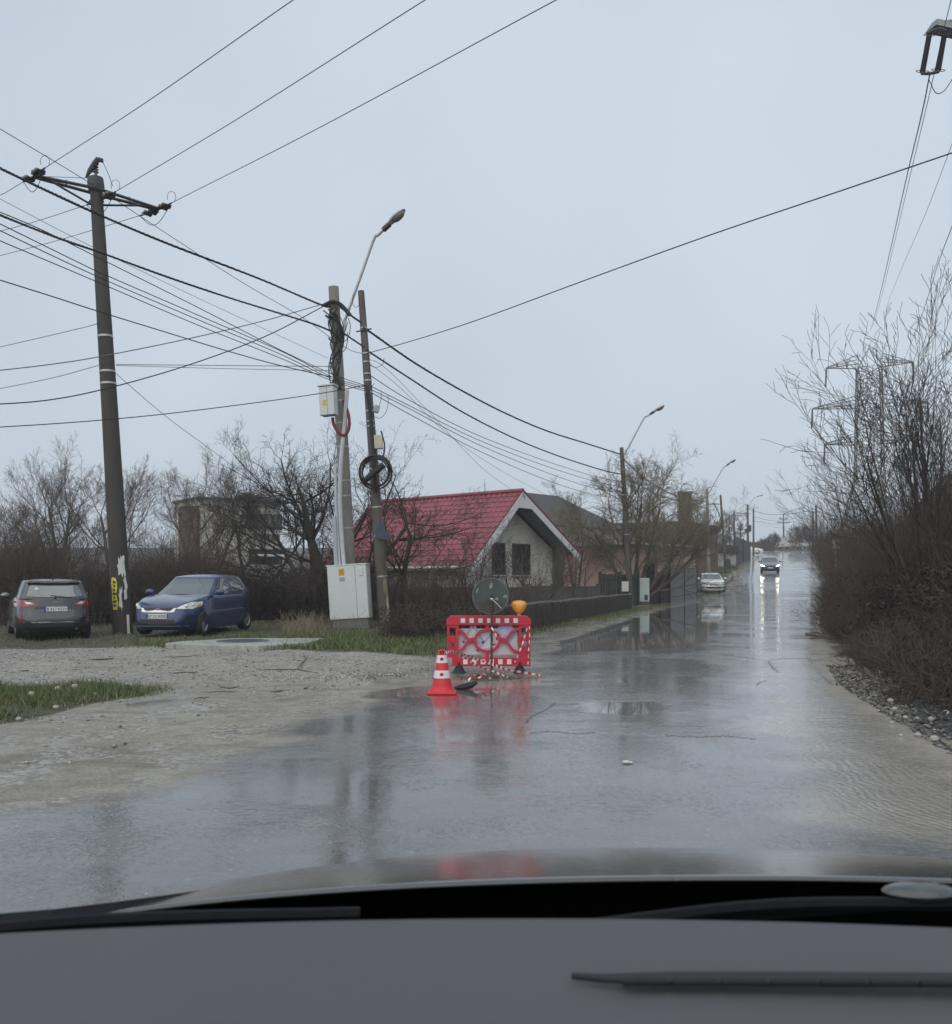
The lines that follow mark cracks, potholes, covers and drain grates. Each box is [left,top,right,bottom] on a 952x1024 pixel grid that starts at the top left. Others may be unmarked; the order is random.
crack [728,655,832,687]
crack [526,703,595,734]
